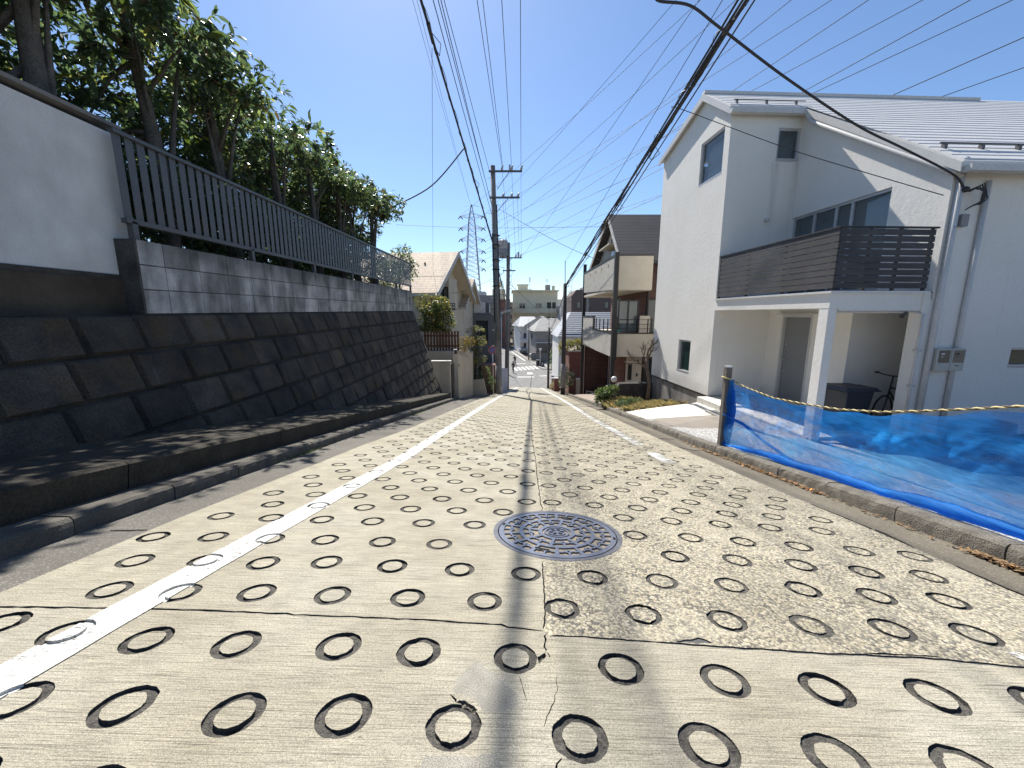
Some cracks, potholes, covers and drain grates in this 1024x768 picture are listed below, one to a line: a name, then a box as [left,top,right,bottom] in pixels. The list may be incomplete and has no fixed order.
manhole cover [493,511,622,561]
